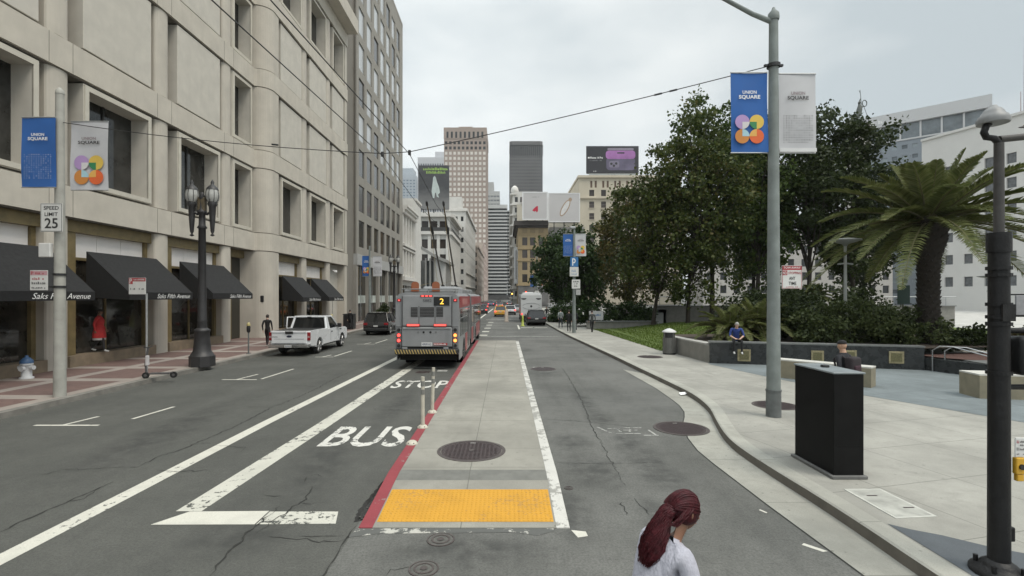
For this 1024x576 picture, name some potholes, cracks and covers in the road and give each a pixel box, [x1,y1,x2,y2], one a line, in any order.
manhole cover [409,560,439,576]
utility cover [844,489,937,519]
manhole cover [653,421,710,436]
crack [552,369,639,479]
manhole cover [437,440,506,462]
crack [3,372,349,531]
crack [215,474,337,570]
manhole cover [751,401,795,410]
manhole cover [427,532,455,547]
